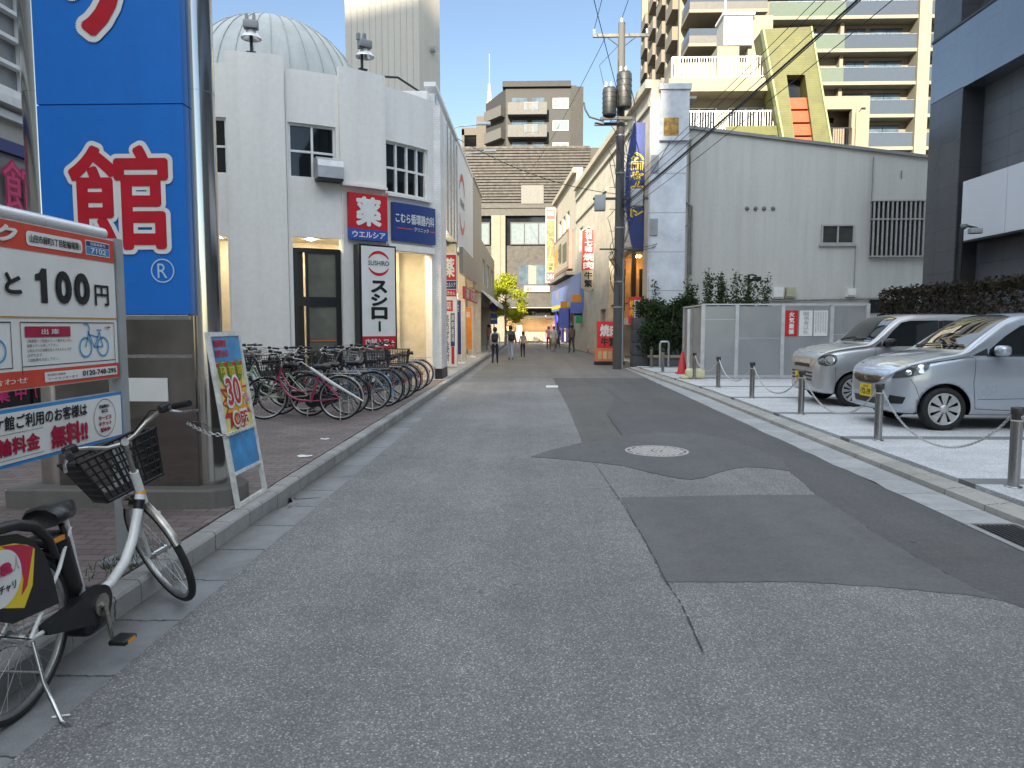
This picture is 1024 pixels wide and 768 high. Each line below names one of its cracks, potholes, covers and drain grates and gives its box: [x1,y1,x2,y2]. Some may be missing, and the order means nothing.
crack [593,463,703,652]
drain grate [961,522,1024,553]
manhole cover [625,445,689,457]
